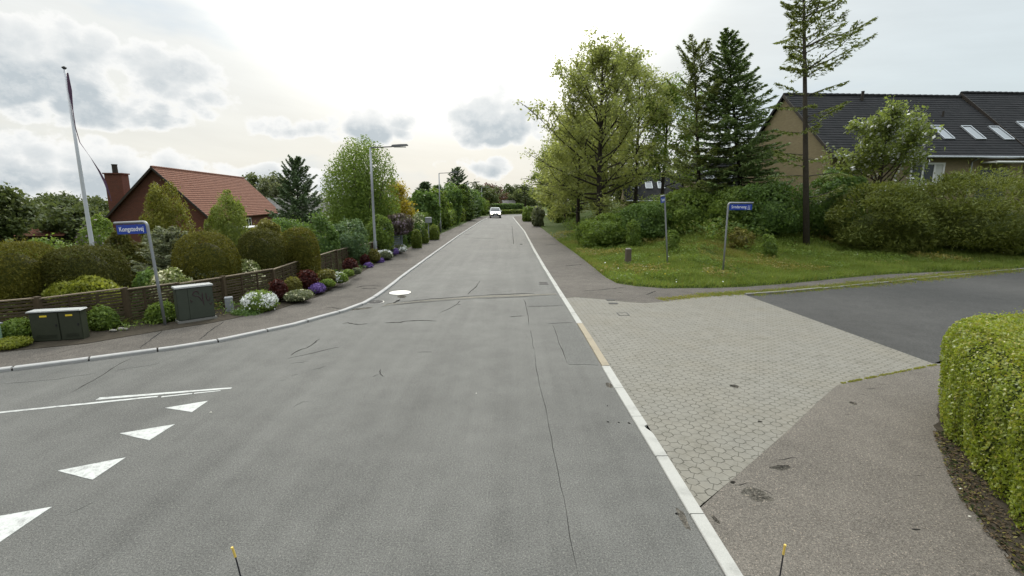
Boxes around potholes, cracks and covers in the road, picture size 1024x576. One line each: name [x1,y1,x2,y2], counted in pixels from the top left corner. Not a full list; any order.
pothole [740,487,774,502]
crack [535,360,578,573]
crack [6,331,162,392]
pothole [676,508,691,530]
crack [388,281,480,323]
